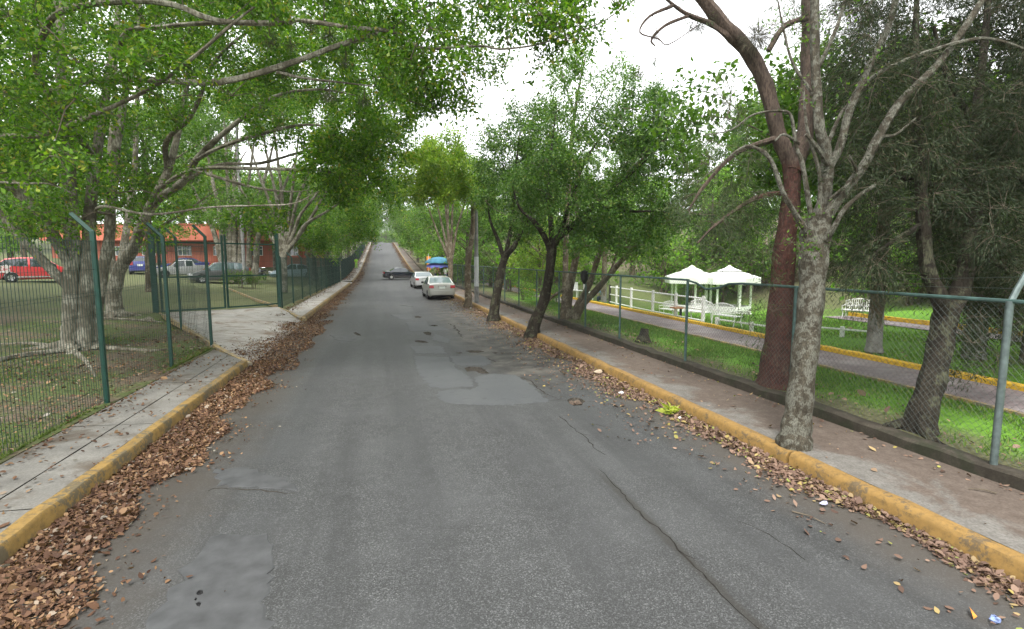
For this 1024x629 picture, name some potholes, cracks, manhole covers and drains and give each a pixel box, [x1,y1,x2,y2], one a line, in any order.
crack [516,377,759,629]
